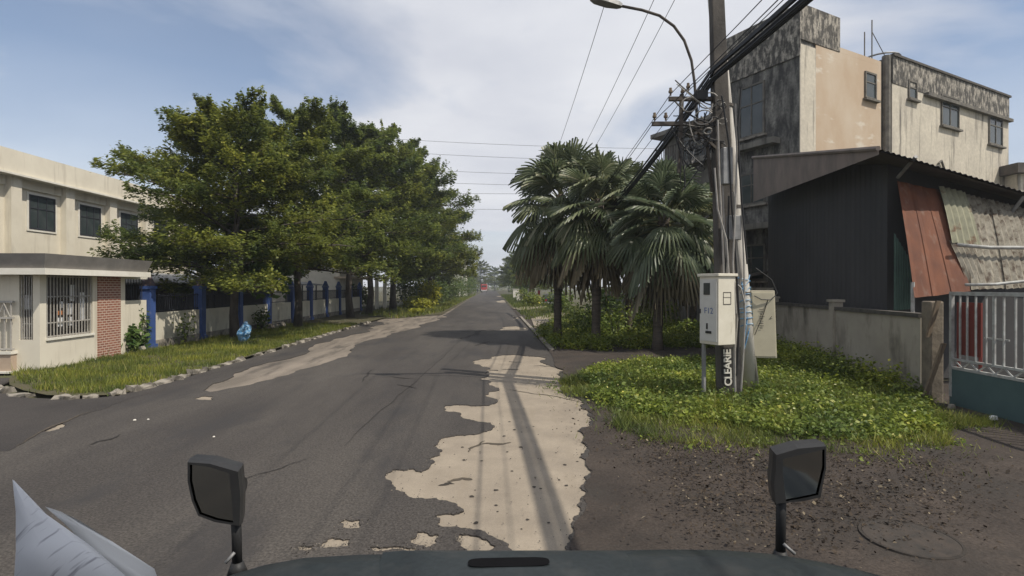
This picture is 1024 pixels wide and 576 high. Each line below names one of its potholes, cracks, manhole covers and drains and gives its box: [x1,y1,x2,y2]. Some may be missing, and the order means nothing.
crack [362,368,415,388]
pothole [322,539,348,548]
pothole [385,355,592,550]
manhole cover [858,519,967,560]
